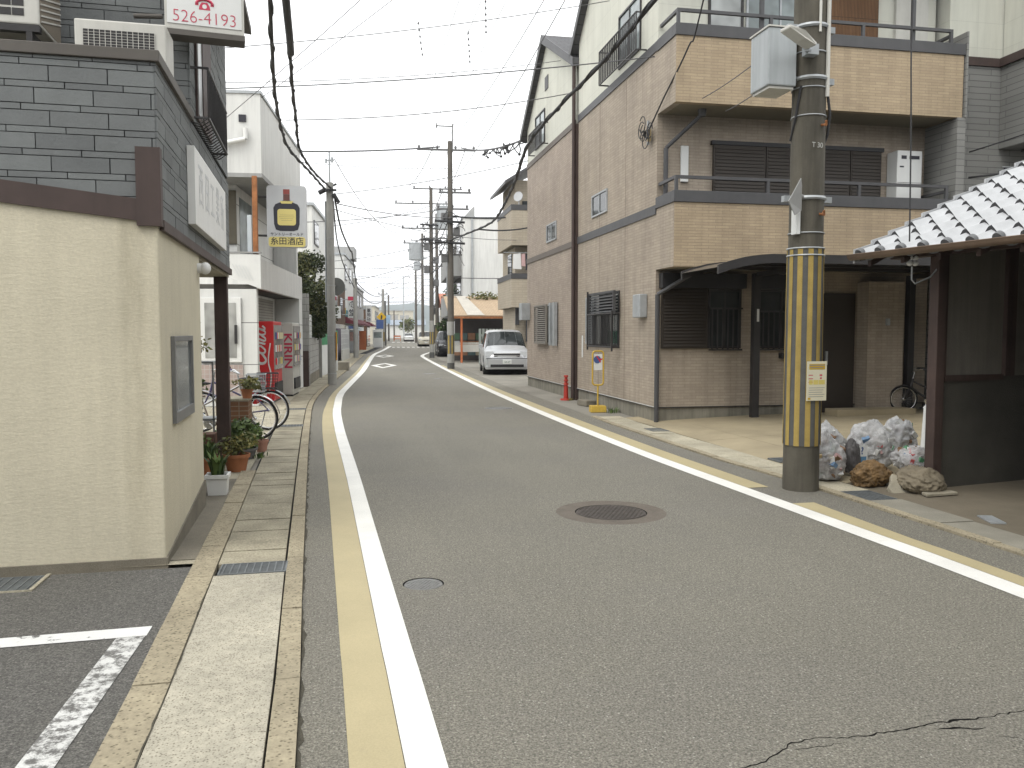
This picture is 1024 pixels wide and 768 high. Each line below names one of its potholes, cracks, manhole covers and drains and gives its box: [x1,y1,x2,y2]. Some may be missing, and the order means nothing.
drain grate [0,575,45,591]
crack [743,710,1024,768]
manhole cover [403,578,444,590]
drain grate [840,490,897,500]
drain grate [217,561,288,576]
manhole cover [556,501,667,525]
